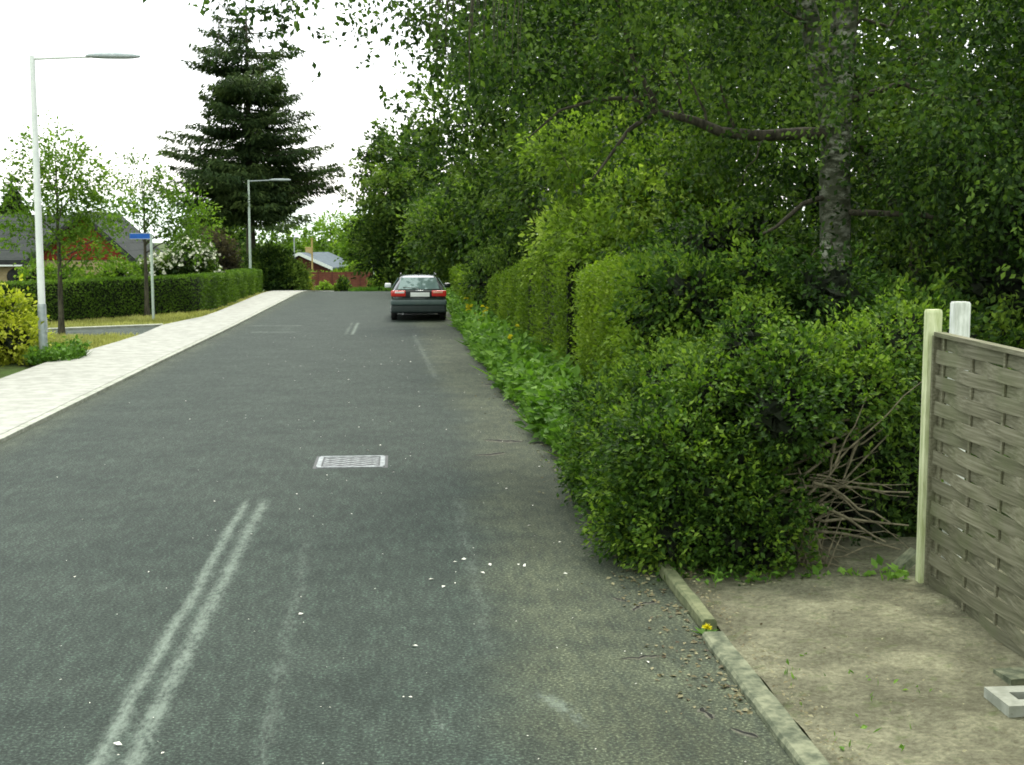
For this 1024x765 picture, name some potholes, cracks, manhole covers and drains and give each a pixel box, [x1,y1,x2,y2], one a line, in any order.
crack [477,439,522,456]
